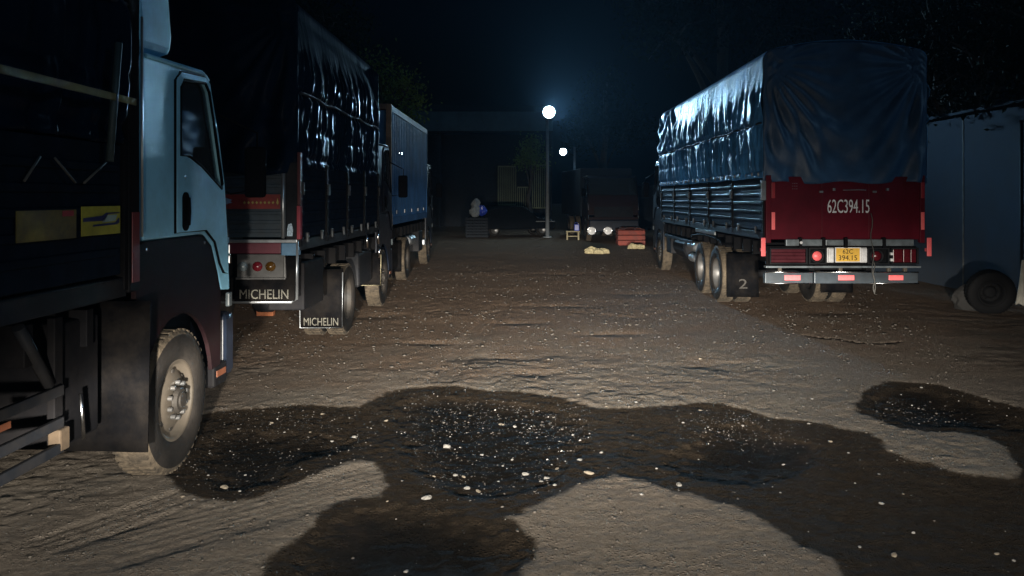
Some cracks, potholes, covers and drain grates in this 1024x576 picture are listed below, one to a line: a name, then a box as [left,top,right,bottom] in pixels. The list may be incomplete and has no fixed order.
pothole [290,504,529,576]
pothole [198,428,355,493]
crack [801,334,906,345]
pothole [391,394,589,500]
pothole [664,421,821,486]
pothole [867,387,1010,430]
